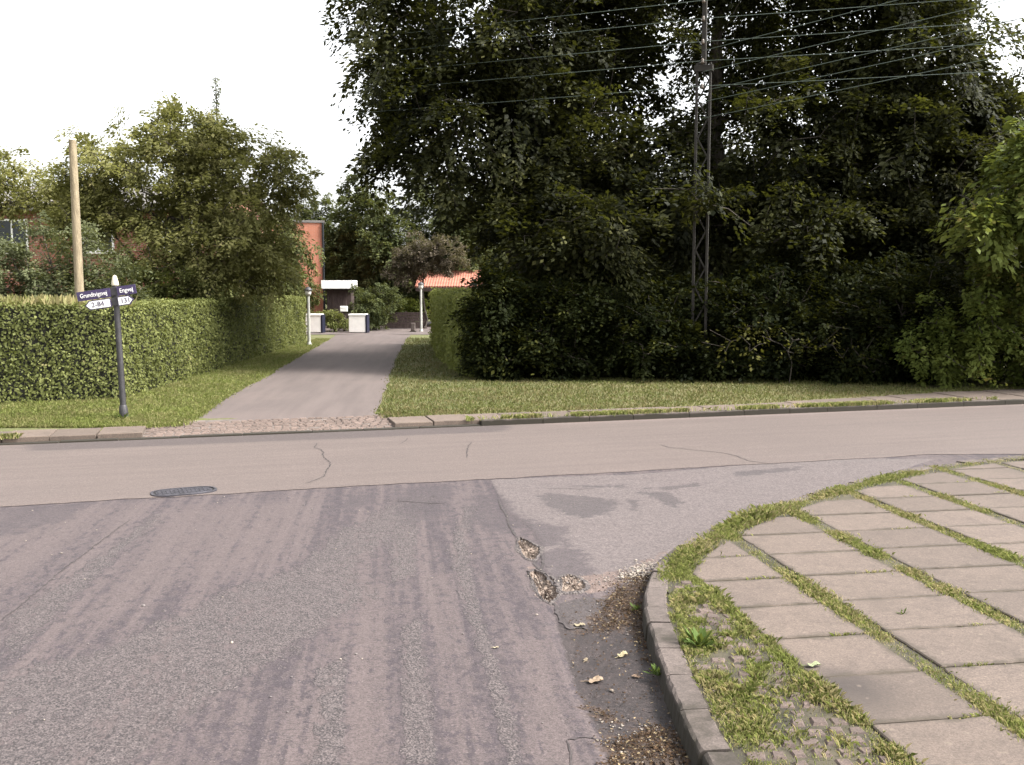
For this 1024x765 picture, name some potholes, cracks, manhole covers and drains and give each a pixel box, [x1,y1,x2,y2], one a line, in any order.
pothole [556,573,591,594]
pothole [514,536,544,561]
pothole [527,569,562,605]
crack [498,499,592,630]
manhole cover [150,486,217,497]
crack [566,736,605,765]
